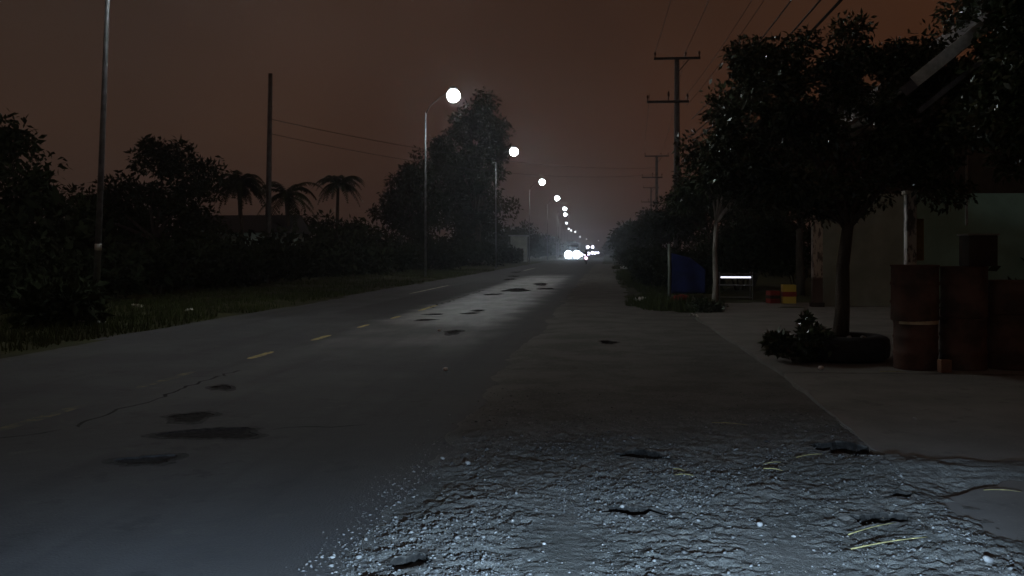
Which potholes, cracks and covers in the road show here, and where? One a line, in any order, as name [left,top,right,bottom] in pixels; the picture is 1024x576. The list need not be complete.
crack [1,370,239,438]
pothole [141,426,269,440]
pothole [160,411,223,425]
pothole [101,453,189,467]
